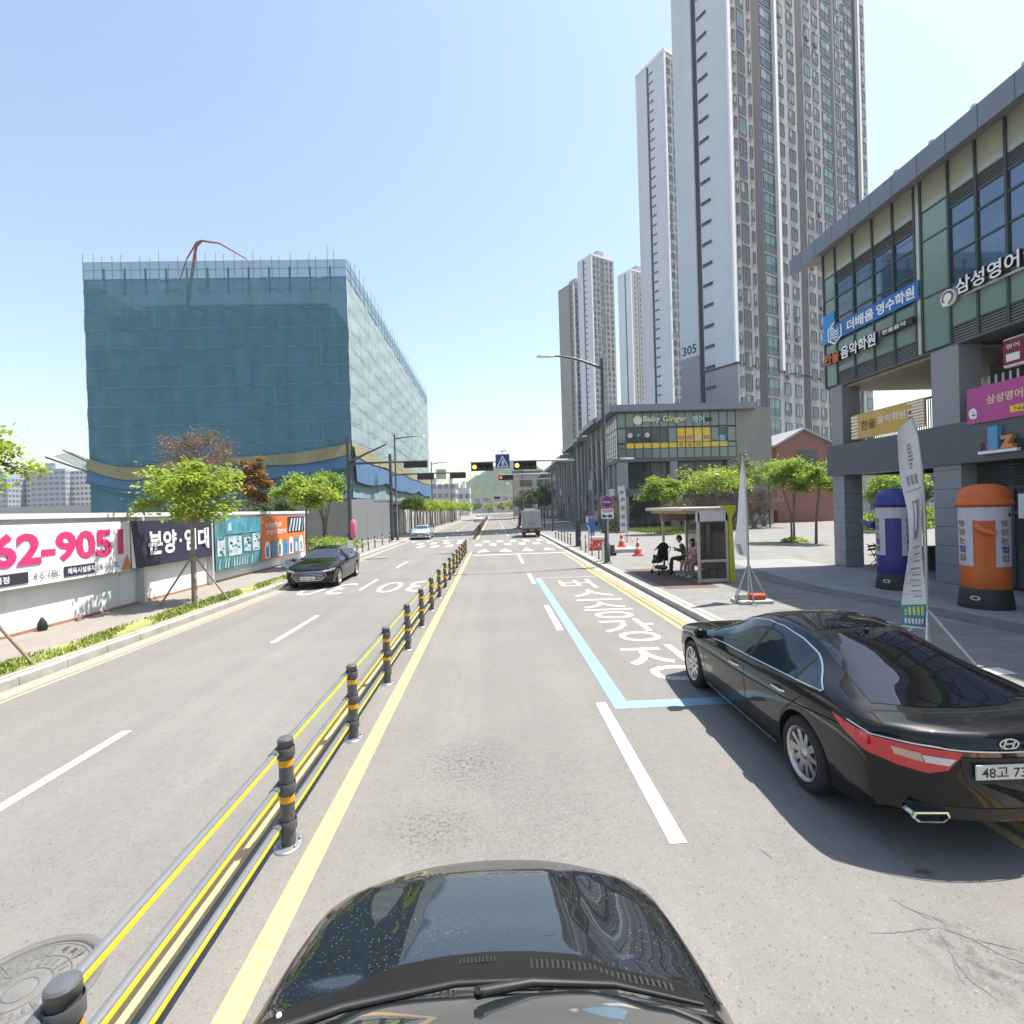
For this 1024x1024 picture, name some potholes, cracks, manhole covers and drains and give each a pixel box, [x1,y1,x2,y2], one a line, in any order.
crack [871,897,1022,1000]
manhole cover [0,934,108,1024]
